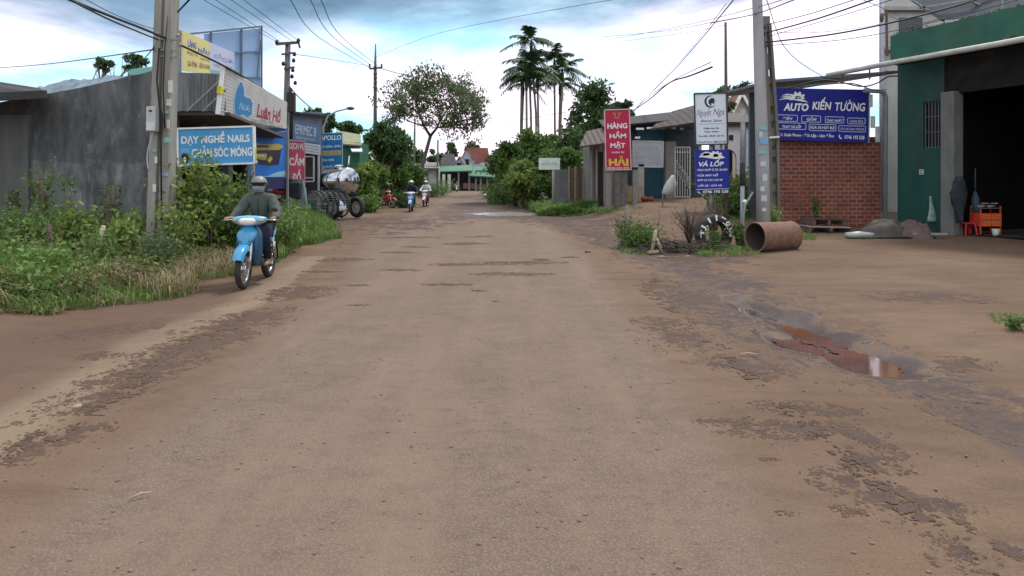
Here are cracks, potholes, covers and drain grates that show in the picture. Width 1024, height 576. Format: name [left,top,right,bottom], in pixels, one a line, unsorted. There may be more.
pothole [808,345,948,382]
pothole [756,305,894,358]
